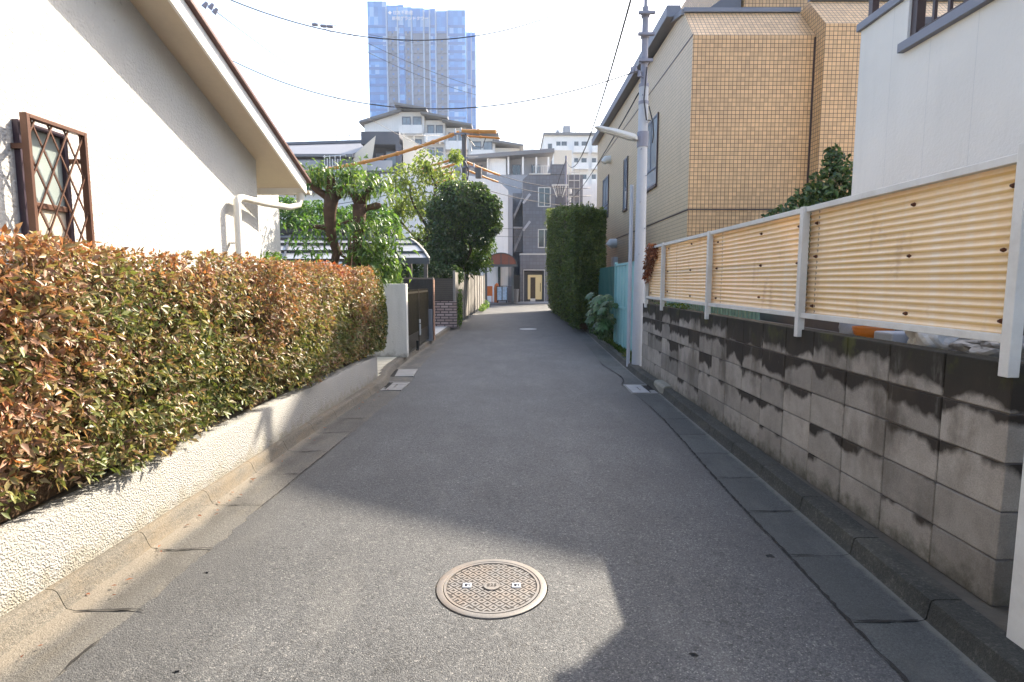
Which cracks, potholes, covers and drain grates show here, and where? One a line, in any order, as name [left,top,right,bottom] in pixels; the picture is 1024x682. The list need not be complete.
manhole cover [436,559,547,620]
